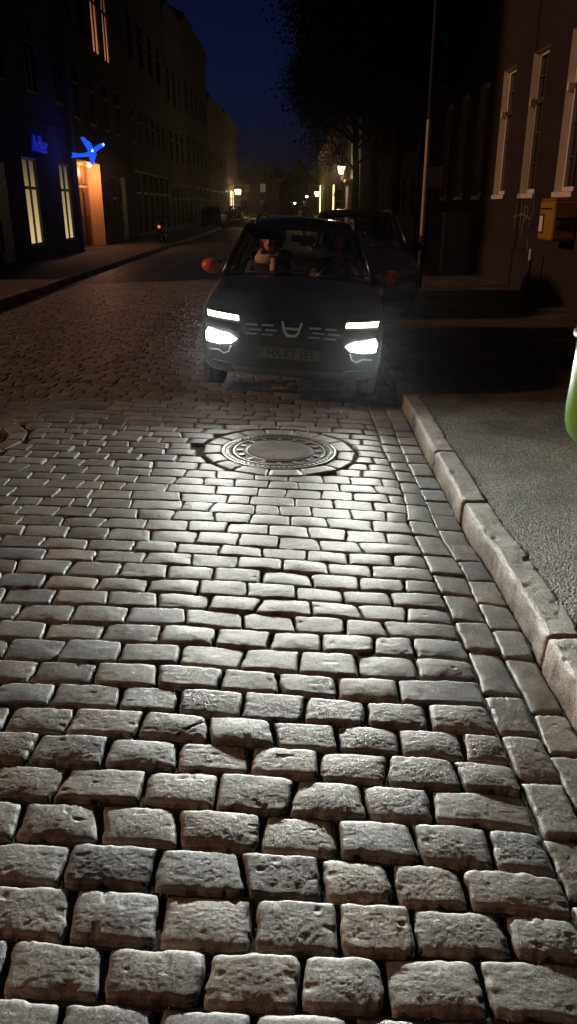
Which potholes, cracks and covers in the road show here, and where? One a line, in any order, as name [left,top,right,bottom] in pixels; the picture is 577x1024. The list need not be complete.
manhole cover [222,434,337,472]
